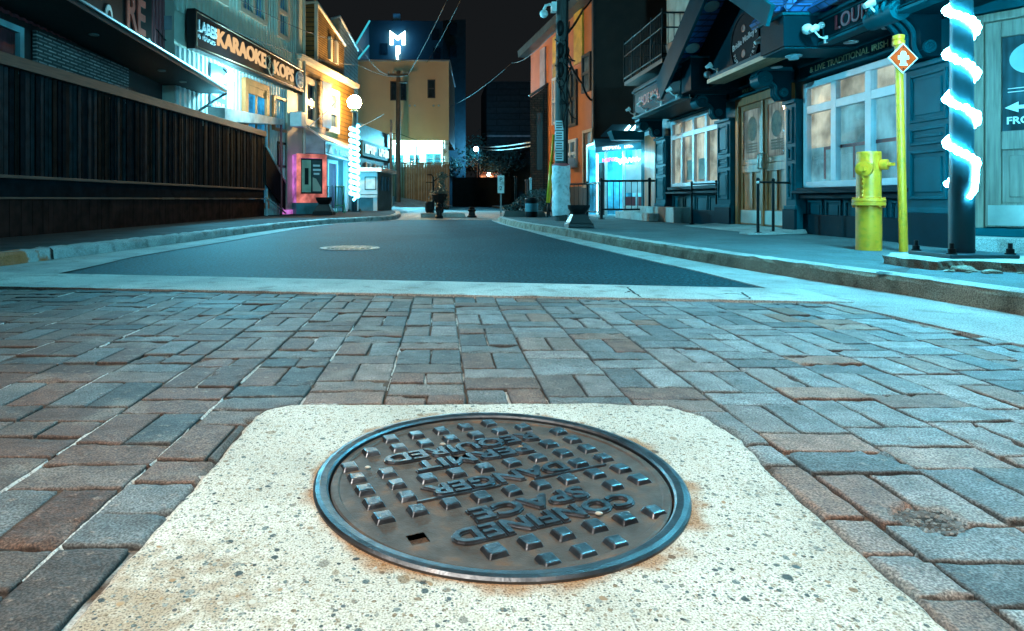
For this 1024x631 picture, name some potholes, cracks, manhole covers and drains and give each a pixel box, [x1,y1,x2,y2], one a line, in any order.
pothole [892,508,967,536]
manhole cover [313,412,691,585]
